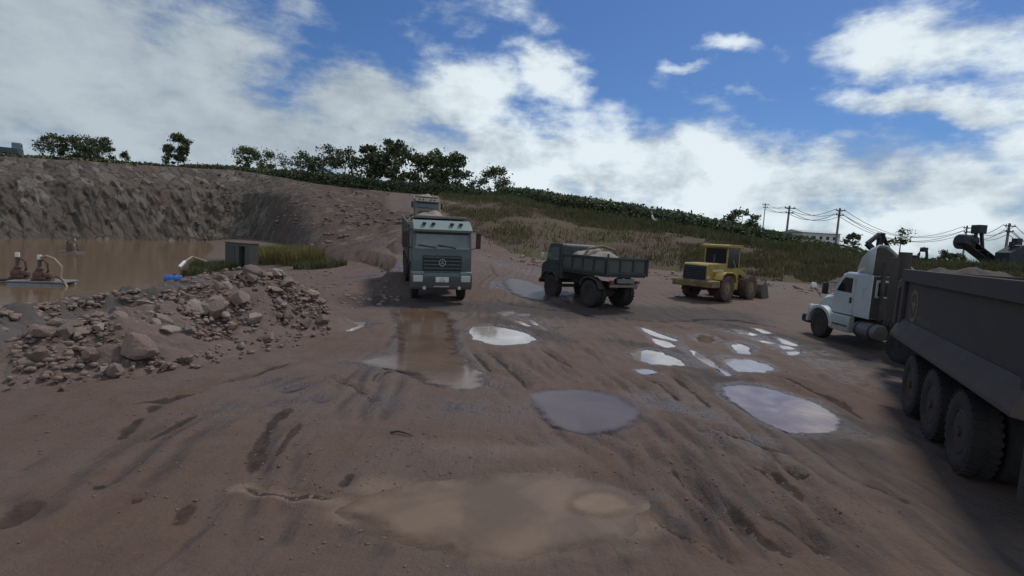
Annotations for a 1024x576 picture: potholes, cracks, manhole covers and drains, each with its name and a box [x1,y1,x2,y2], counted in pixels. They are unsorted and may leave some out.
pothole [629,350,685,366]
pothole [335,471,651,562]
pothole [723,359,774,373]
pothole [721,385,841,434]
pothole [469,326,536,345]
pothole [356,307,482,390]
pothole [503,278,550,301]
pothole [529,388,641,435]
